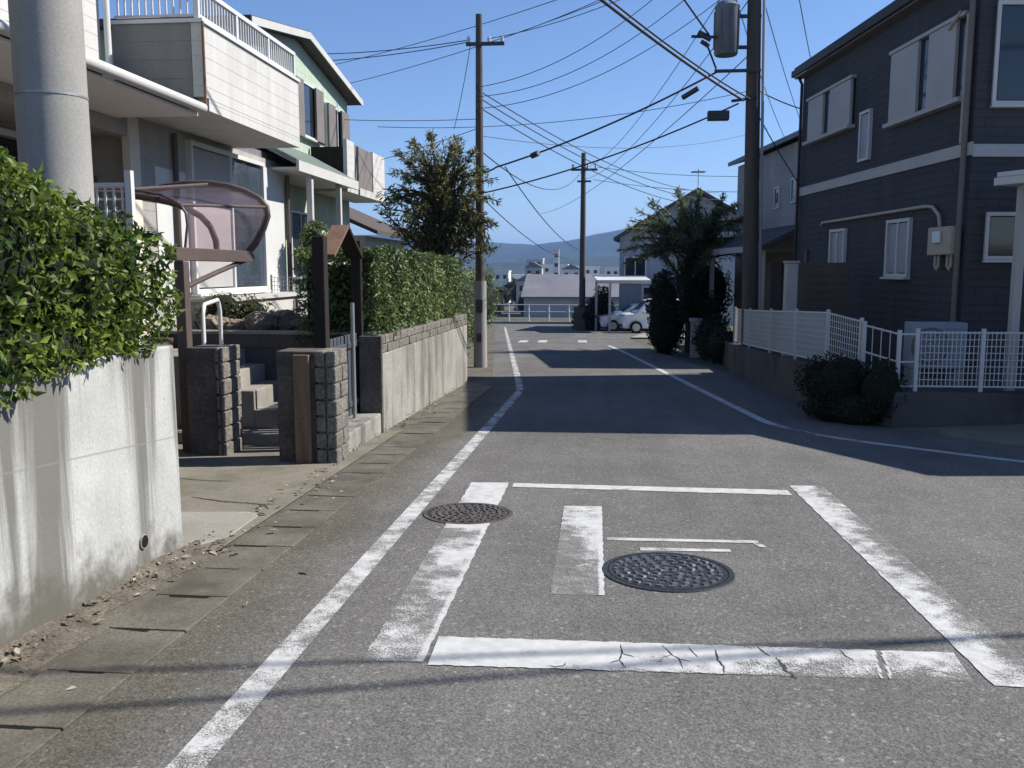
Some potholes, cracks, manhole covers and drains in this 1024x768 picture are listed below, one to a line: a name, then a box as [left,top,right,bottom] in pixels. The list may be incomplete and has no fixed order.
manhole cover [423,503,513,524]
crack [182,478,269,509]
crack [757,646,797,678]
manhole cover [602,552,735,593]
